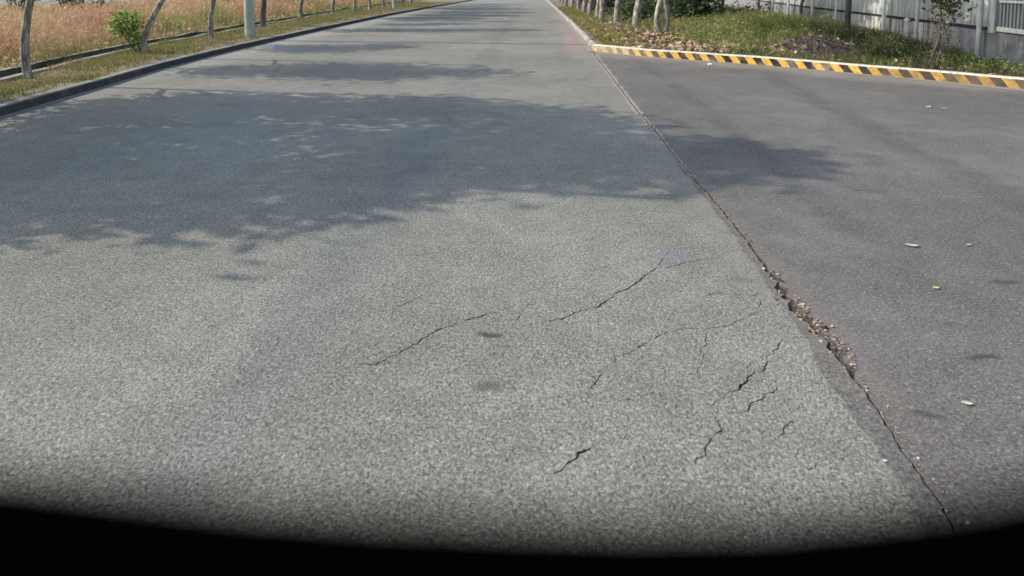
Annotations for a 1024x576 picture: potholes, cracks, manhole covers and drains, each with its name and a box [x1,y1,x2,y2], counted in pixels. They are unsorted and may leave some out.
crack [545,445,592,475]
crack [339,250,734,379]
